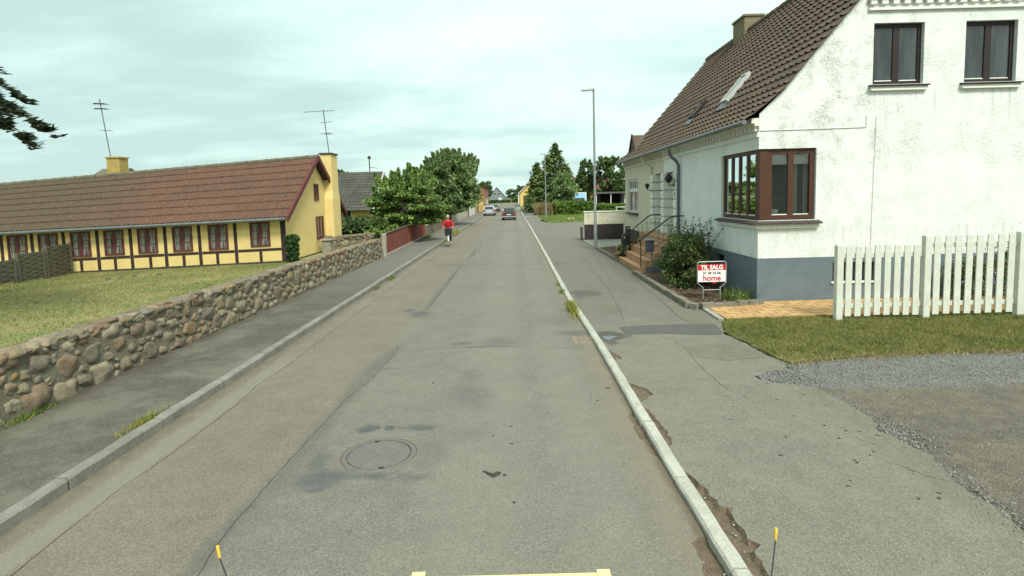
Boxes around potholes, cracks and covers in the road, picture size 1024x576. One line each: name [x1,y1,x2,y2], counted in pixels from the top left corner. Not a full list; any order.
manhole cover [340,438,417,473]
pothole [684,471,769,576]
pothole [629,383,653,402]
